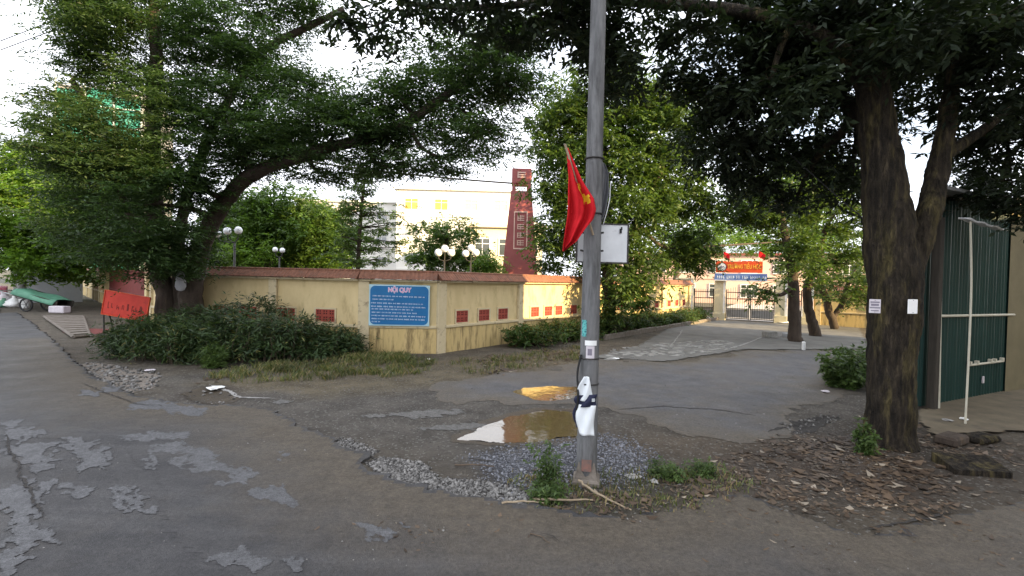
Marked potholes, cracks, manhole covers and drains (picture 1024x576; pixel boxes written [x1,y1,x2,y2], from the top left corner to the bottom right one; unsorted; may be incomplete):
pothole [450,408,604,446]
pothole [513,386,577,401]
pothole [365,456,532,506]
pothole [779,412,841,434]
pothole [82,361,163,393]
pothole [335,437,380,456]
crack [629,406,821,432]
